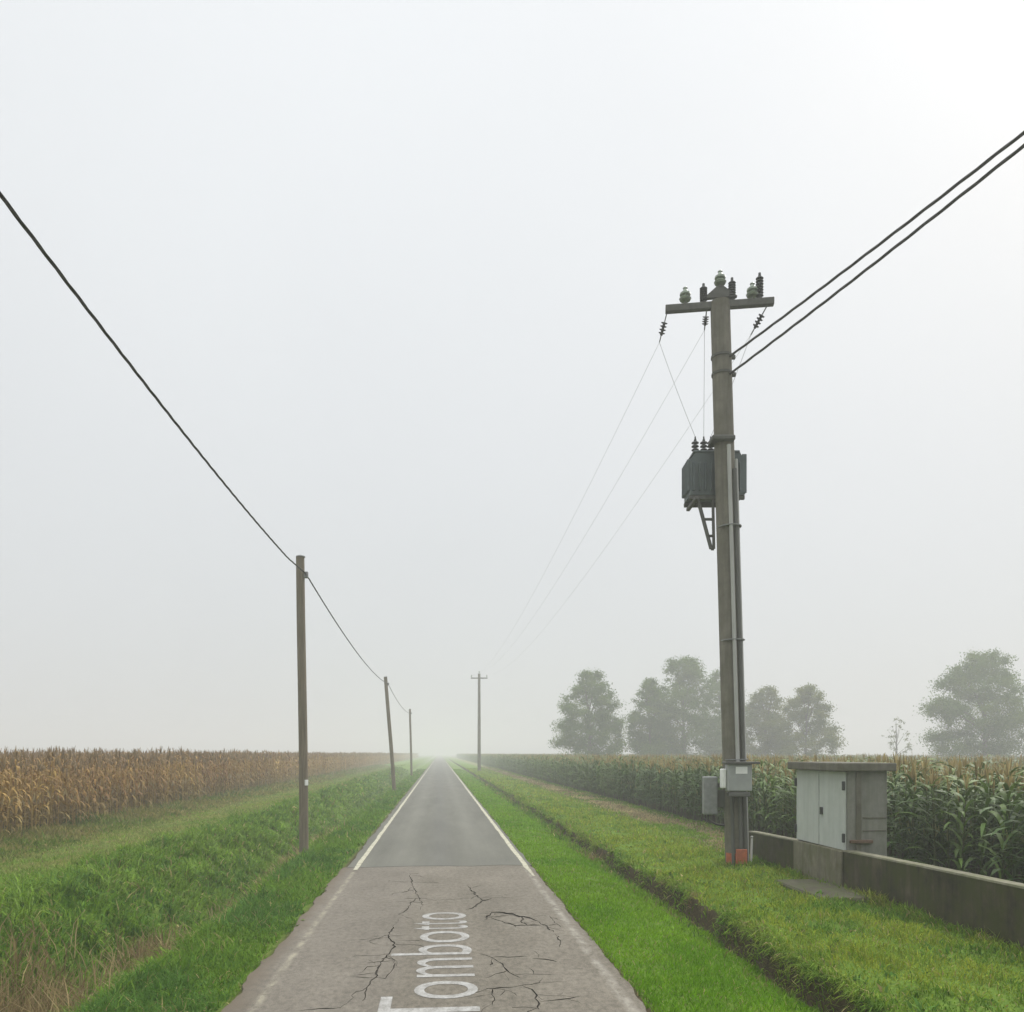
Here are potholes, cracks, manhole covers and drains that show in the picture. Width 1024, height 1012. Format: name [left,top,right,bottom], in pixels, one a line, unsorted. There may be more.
crack [463,885,580,1012]
crack [300,873,439,1011]
